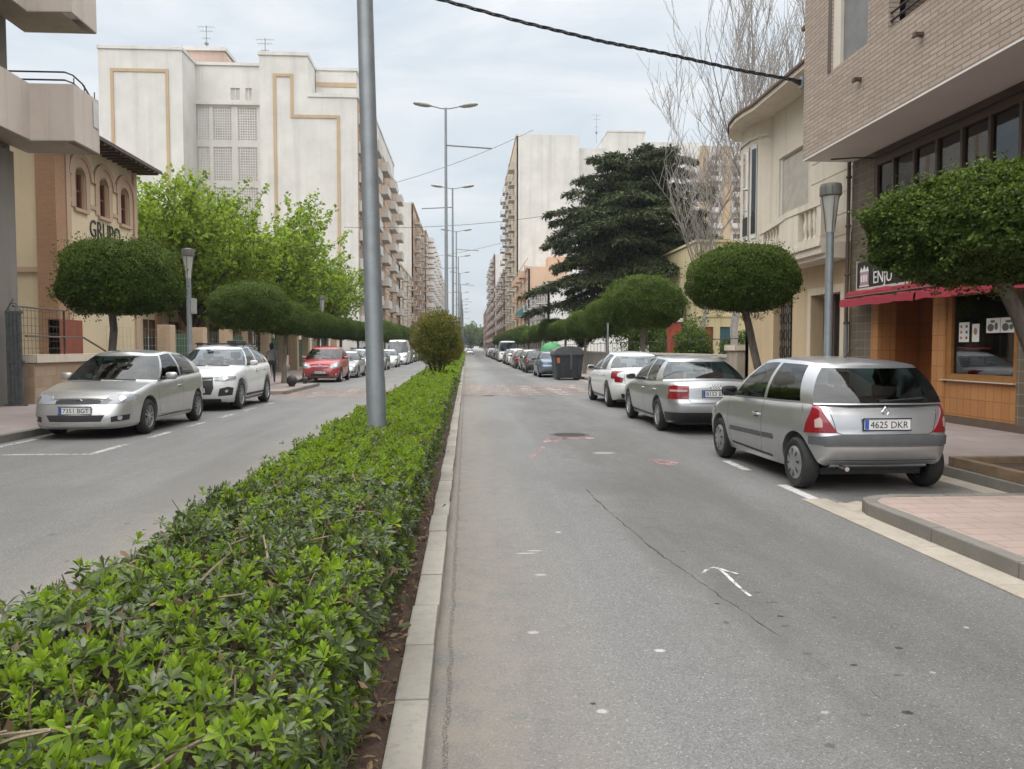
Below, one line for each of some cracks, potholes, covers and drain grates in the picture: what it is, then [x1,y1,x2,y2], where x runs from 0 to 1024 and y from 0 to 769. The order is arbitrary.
crack [587,490,882,699]
